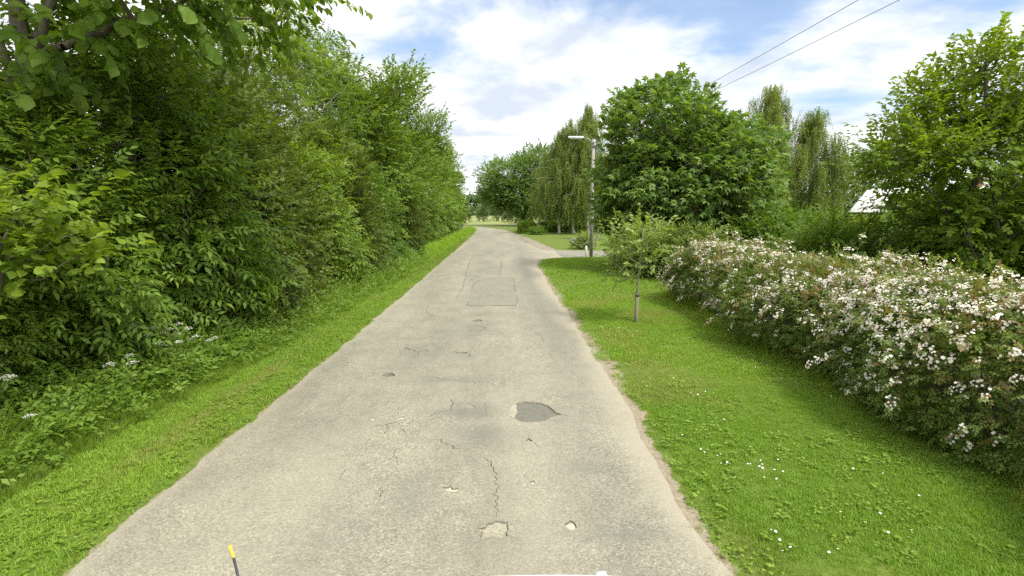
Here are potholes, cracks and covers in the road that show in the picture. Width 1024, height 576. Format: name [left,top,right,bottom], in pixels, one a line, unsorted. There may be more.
pothole [476,520,509,540]
crack [481,456,522,543]
